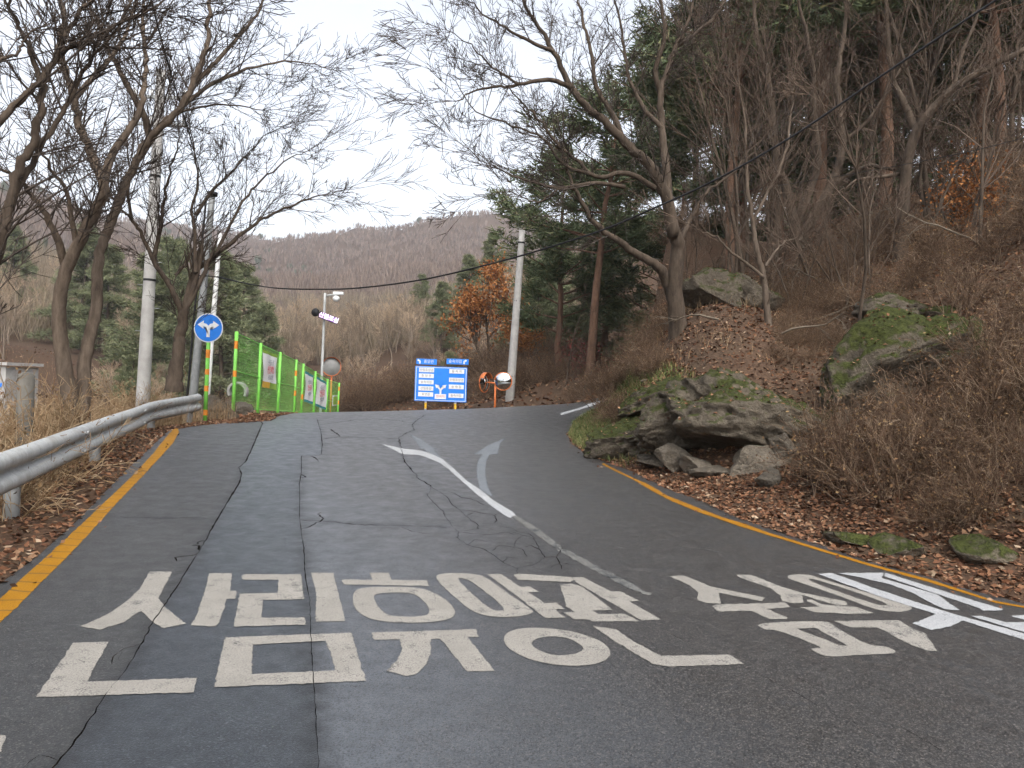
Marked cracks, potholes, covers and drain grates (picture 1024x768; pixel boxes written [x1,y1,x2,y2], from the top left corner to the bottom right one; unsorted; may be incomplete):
crack [23,422,263,768]
crack [305,416,567,574]
